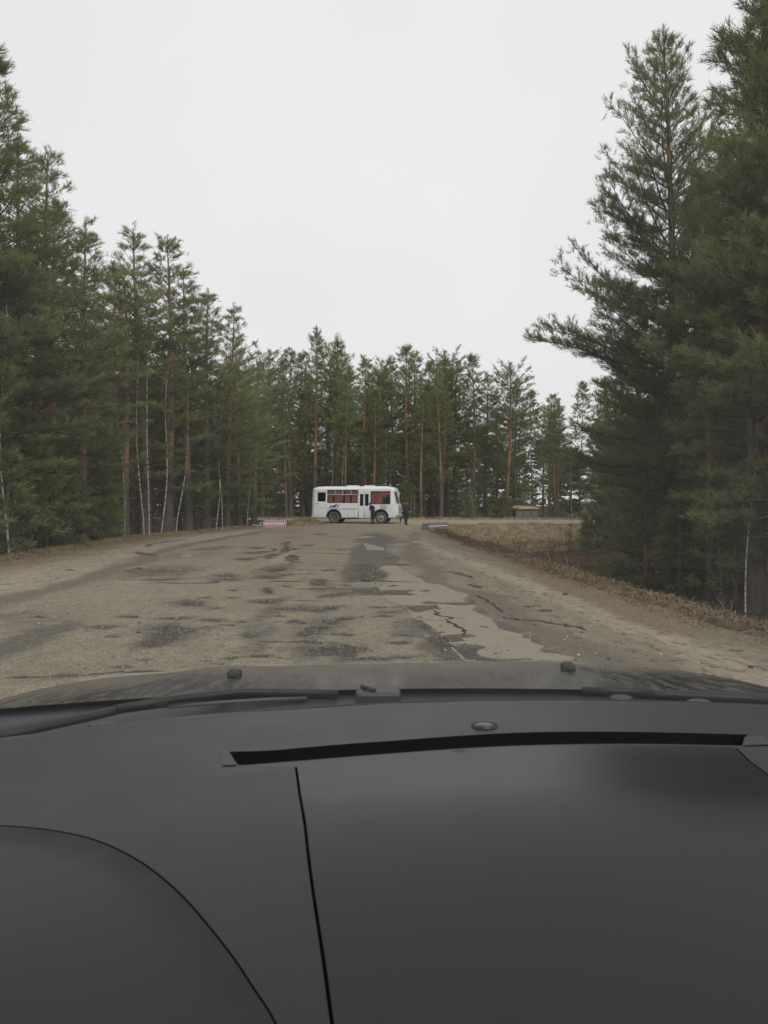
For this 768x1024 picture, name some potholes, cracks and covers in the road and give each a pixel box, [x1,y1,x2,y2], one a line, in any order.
pothole [295,625,329,637]
crack [433,571,587,635]
pothole [132,623,204,649]
pothole [297,644,369,658]
pothole [314,617,355,625]
